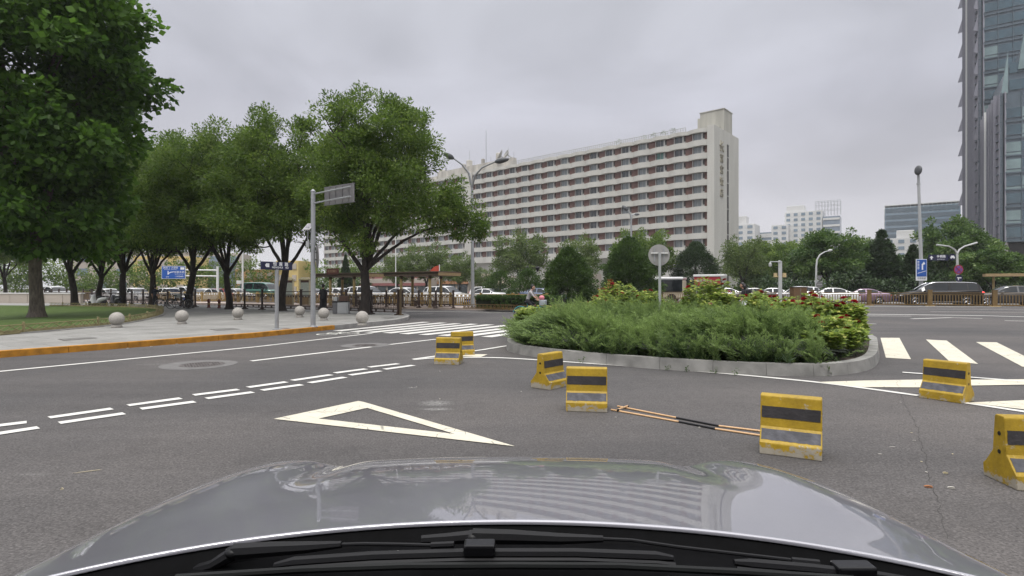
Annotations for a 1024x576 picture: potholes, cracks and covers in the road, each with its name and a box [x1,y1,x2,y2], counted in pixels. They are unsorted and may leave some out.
manhole cover [158,360,238,370]
crack [897,387,948,538]
